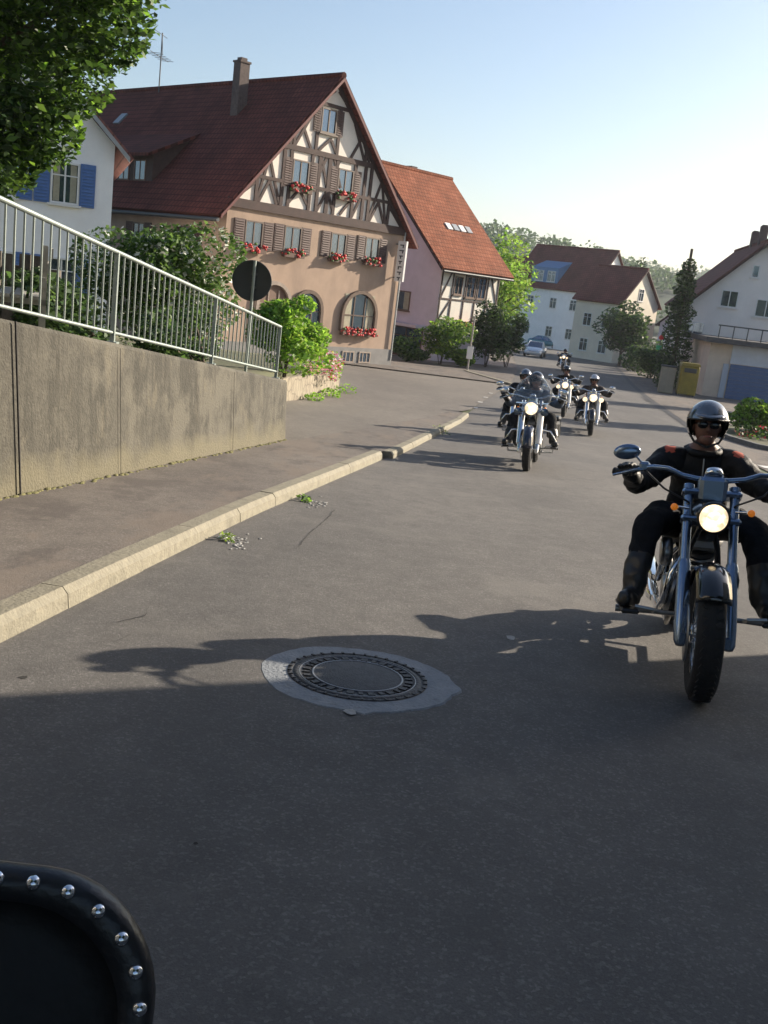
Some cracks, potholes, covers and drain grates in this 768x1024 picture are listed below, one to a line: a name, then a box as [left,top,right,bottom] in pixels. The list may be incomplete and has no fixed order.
manhole cover [261,647,462,715]
